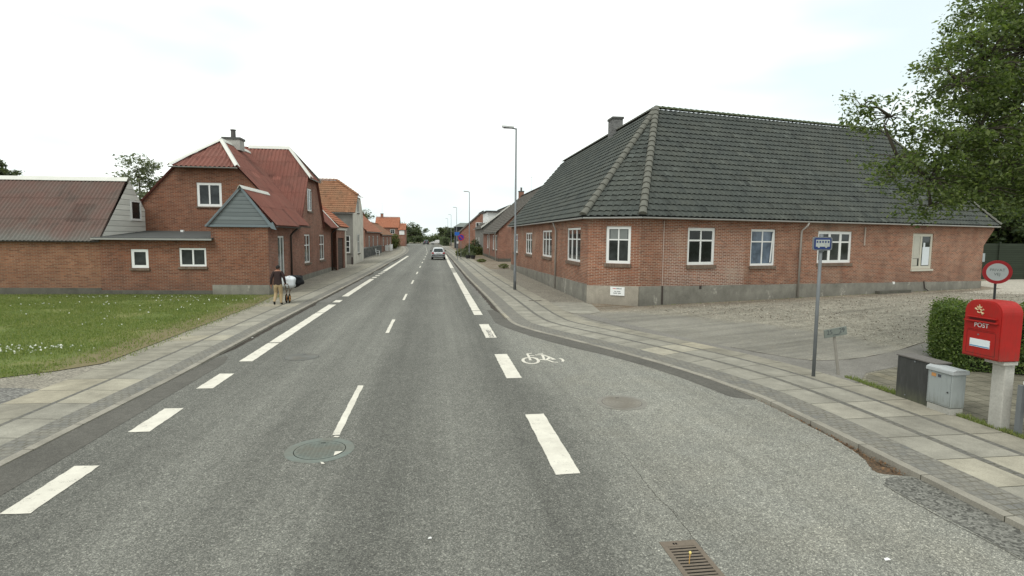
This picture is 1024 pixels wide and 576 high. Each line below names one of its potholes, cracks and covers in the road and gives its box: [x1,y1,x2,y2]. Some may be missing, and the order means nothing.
crack [574,397,707,554]
manhole cover [284,436,354,464]
pothole [804,423,904,476]
manhole cover [597,395,647,410]
drain grate [659,540,725,576]
